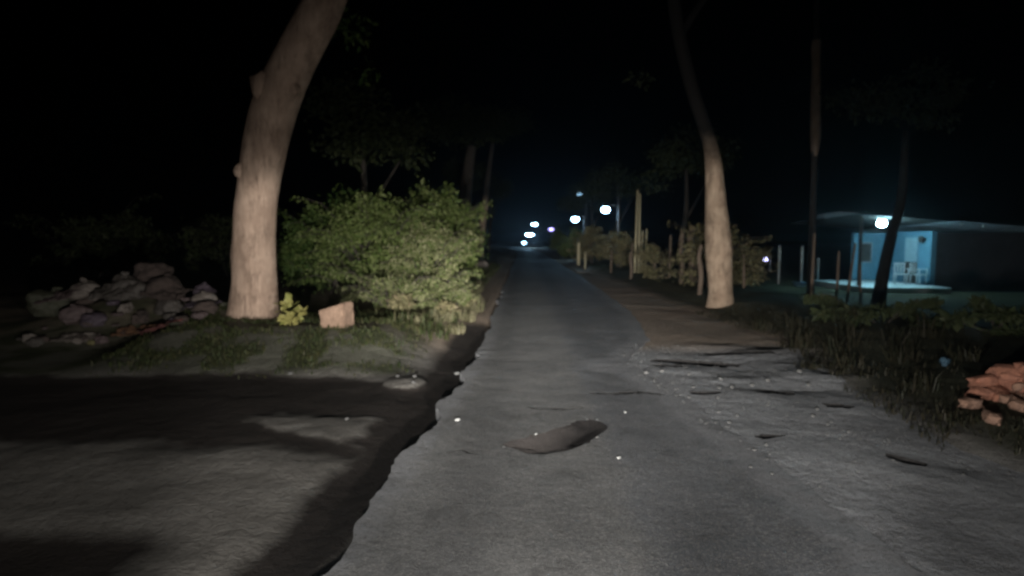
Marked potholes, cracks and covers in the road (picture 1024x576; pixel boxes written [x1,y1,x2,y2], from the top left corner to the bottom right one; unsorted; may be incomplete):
pothole [501,419,608,454]
crack [529,391,665,410]
